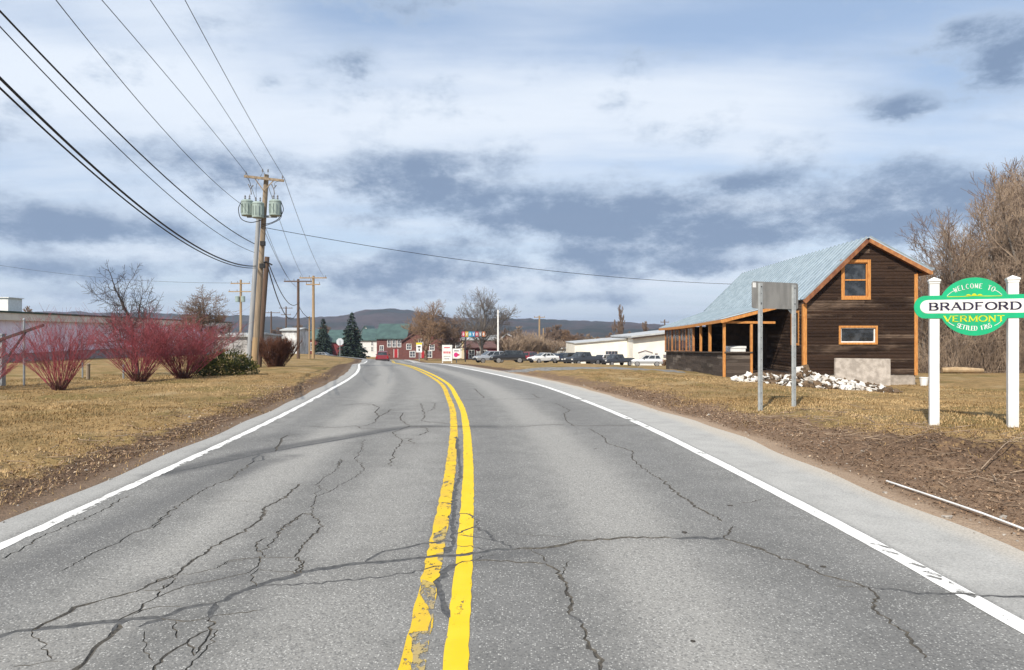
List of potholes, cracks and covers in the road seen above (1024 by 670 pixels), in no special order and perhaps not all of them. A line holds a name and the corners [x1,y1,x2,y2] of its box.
crack [0,428,1024,670]
